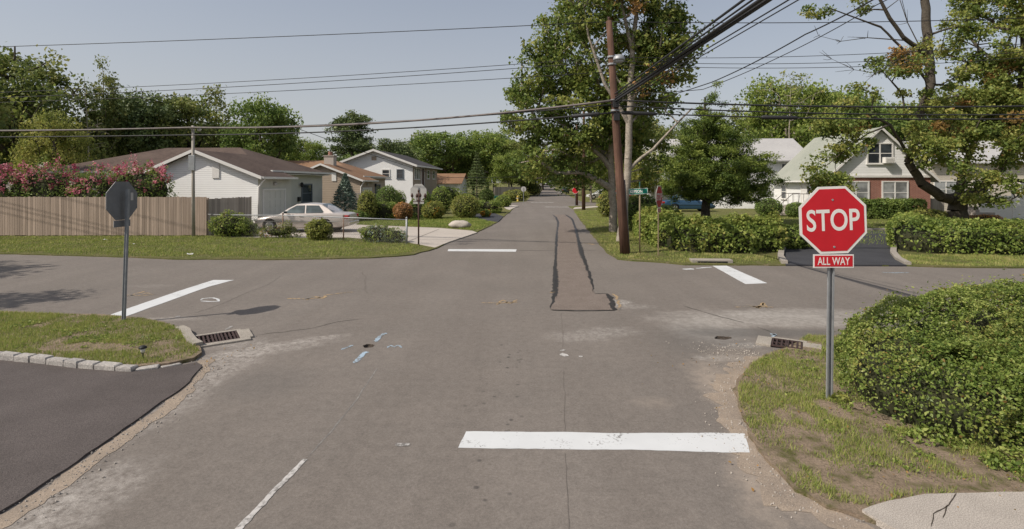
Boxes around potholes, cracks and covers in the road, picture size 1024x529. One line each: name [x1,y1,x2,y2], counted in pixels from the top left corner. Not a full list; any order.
crack [561,313,569,526]
drain grate [756,335,822,349]
crack [931,494,956,525]
drain grate [195,328,254,348]
